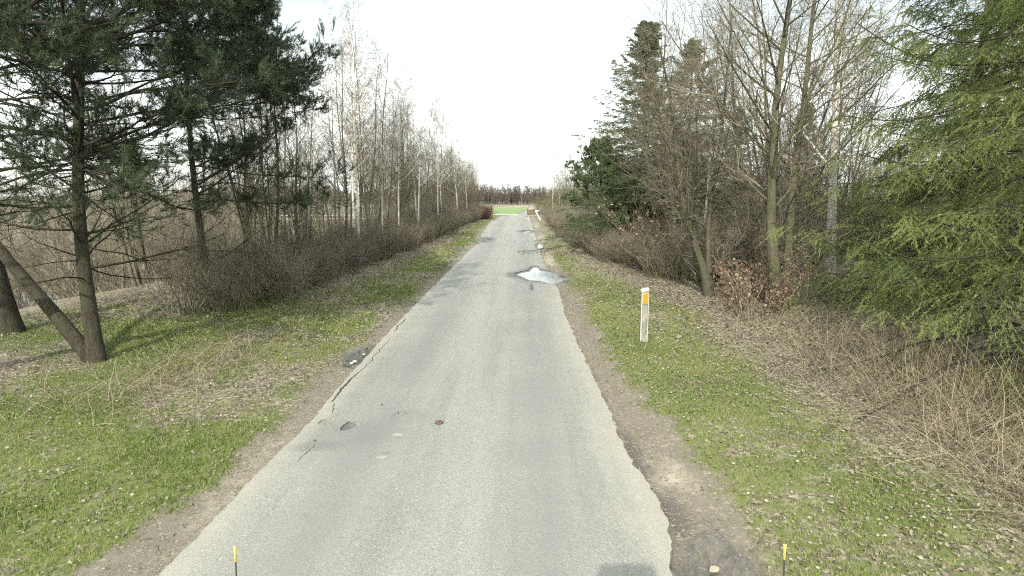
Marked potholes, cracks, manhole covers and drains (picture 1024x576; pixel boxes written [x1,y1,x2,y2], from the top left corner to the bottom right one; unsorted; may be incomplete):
pothole [515,266,569,285]
pothole [343,347,372,367]
